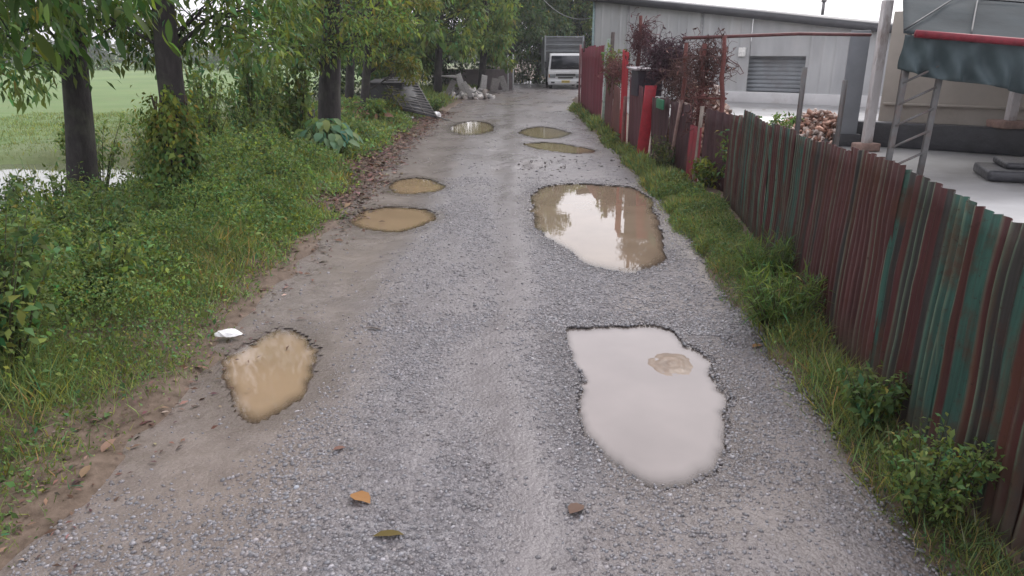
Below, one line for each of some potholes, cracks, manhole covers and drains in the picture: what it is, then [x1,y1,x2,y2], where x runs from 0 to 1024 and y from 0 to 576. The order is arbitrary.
pothole [214,326,323,426]
pothole [560,321,742,494]
pothole [450,121,494,135]
pothole [523,142,597,154]
pothole [344,207,439,232]
pothole [386,177,448,194]
pothole [523,182,671,275]
pothole [517,127,572,139]
